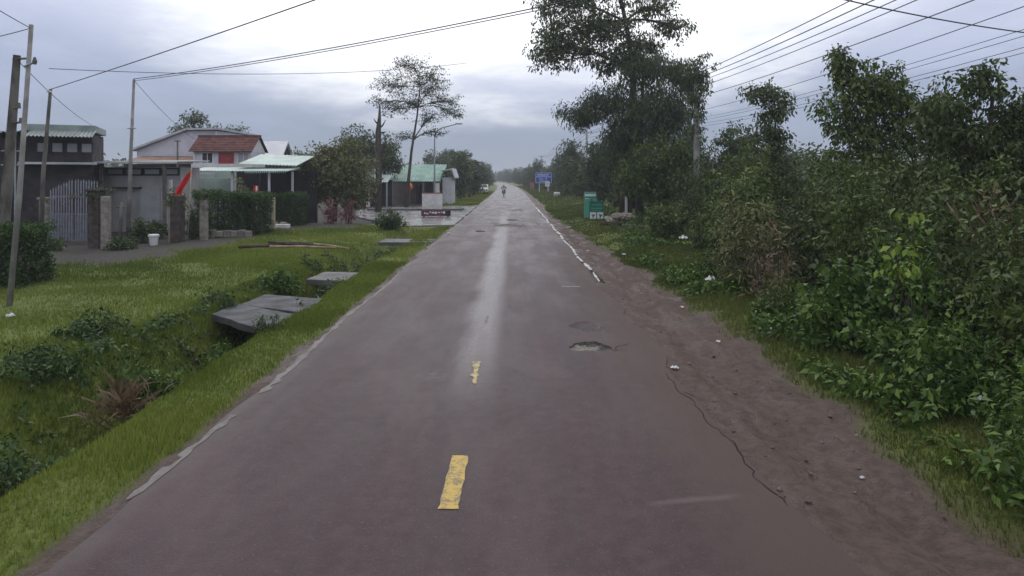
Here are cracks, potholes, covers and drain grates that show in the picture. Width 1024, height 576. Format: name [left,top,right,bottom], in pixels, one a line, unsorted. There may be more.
crack [666,373,787,505]
pothole [569,341,612,351]
